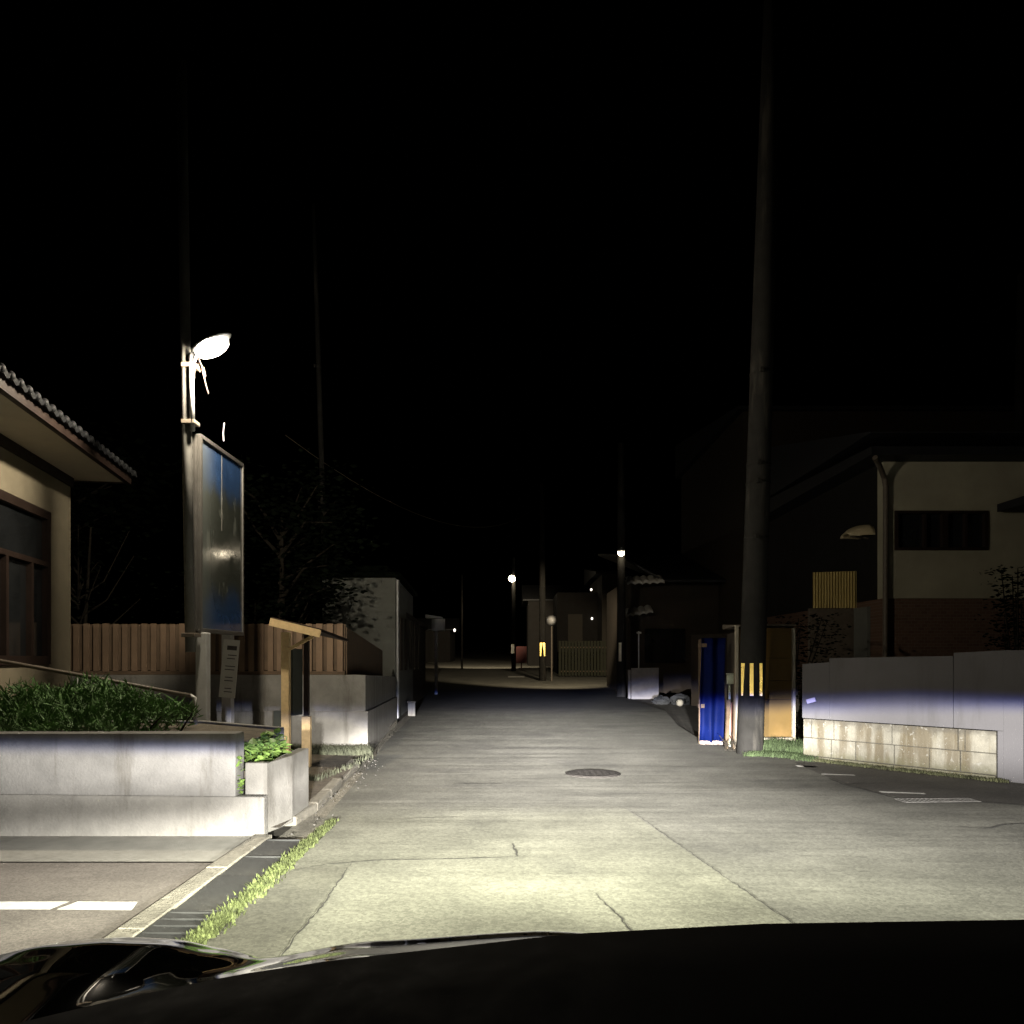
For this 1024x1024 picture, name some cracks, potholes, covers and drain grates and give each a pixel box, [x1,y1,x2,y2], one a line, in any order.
crack [281,843,518,956]
manhole cover [565,769,621,778]
crack [597,894,633,931]
